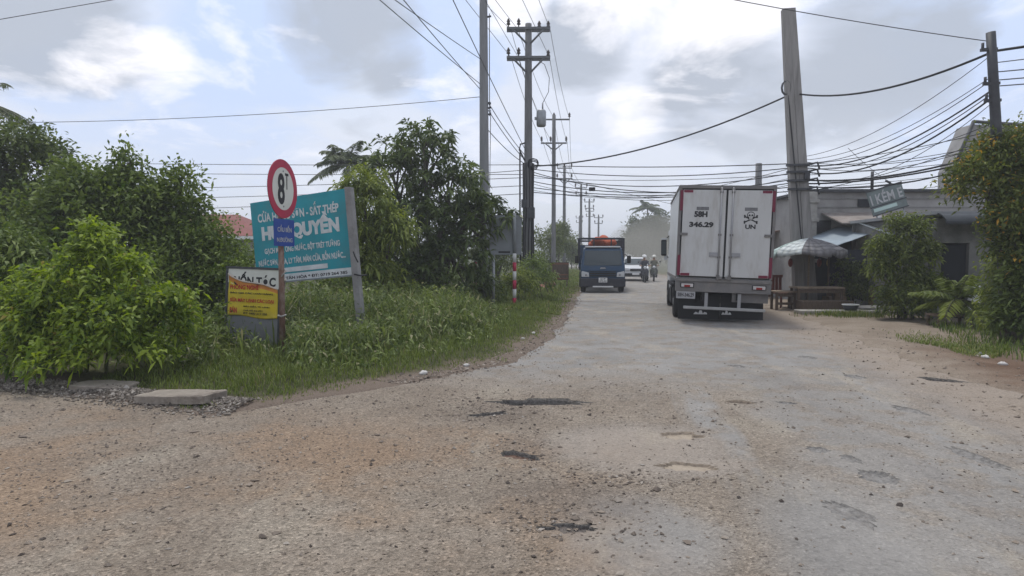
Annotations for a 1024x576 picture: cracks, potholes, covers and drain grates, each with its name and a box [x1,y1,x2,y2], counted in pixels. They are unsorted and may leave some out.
pothole [653,461,719,472]
pothole [892,405,931,416]
pothole [840,454,863,464]
pothole [661,432,706,440]
pothole [944,446,1012,471]
pothole [821,500,877,530]
pothole [858,470,900,485]
